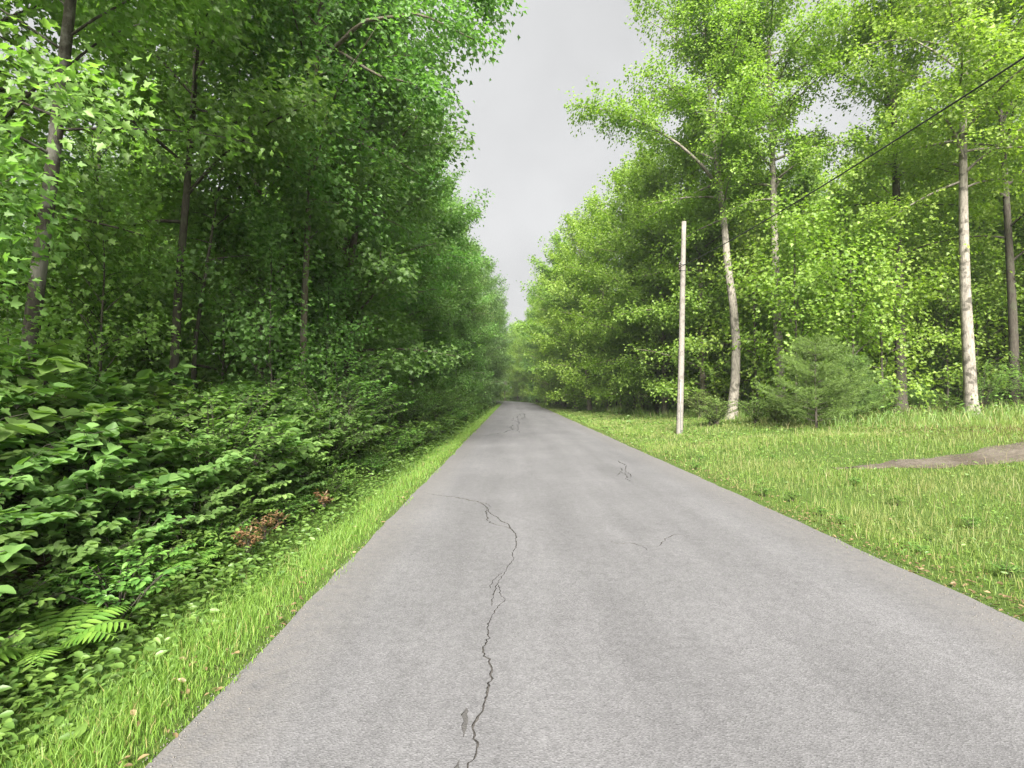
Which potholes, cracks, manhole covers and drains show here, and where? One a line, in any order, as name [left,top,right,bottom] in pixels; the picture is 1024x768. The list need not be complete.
crack [427,493,517,768]
